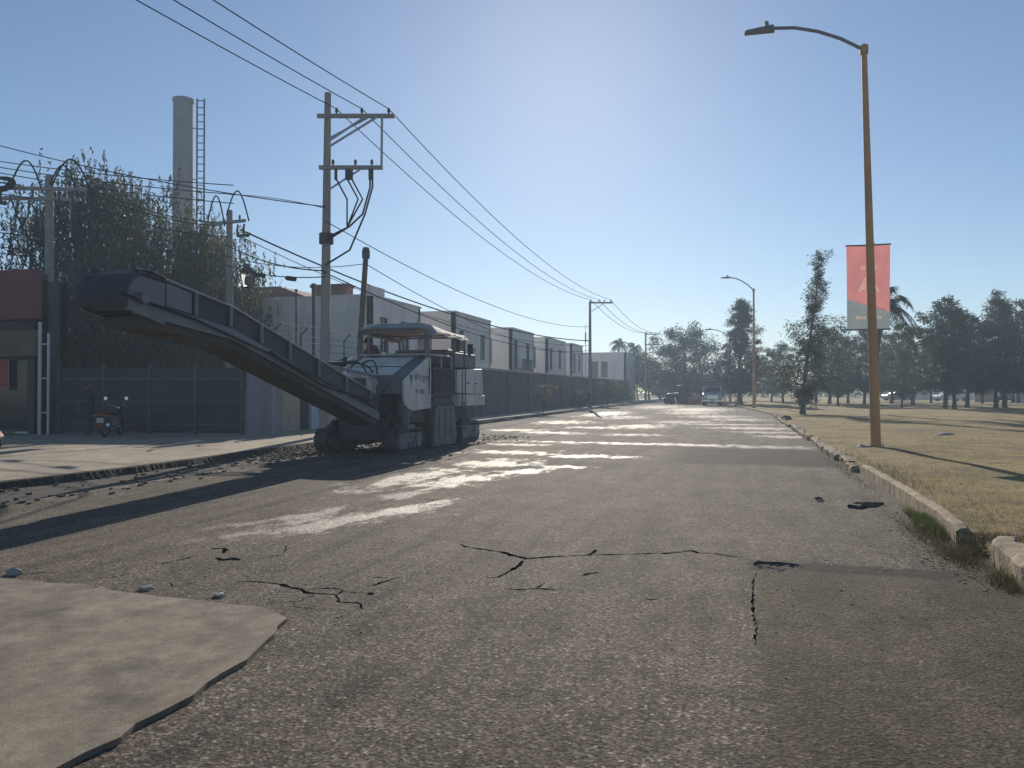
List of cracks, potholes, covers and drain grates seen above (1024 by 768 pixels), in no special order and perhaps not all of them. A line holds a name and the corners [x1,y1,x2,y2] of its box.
pothole [753,561,802,573]
pothole [847,502,884,510]
crack [459,544,745,591]
crack [239,576,400,610]
